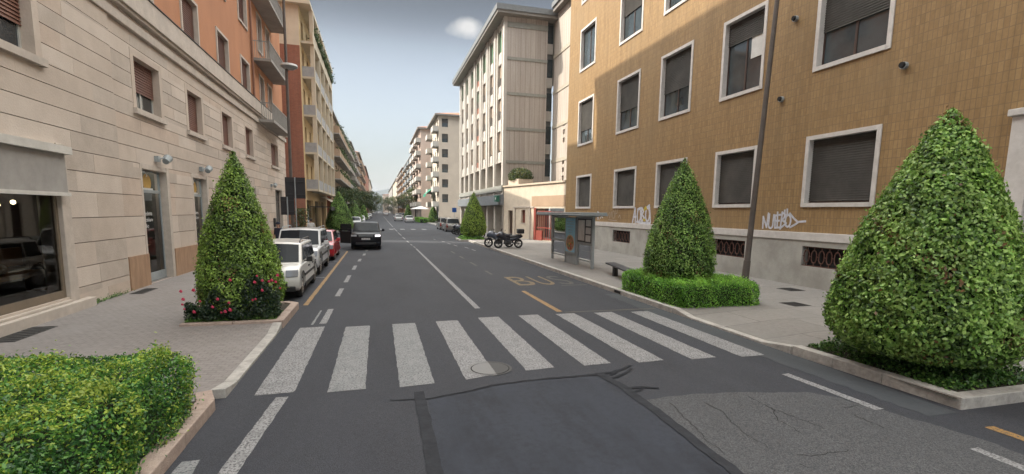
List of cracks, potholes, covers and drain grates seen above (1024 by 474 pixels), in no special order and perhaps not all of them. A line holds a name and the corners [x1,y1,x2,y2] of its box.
manhole cover [468,361,512,375]
crack [669,396,889,467]
